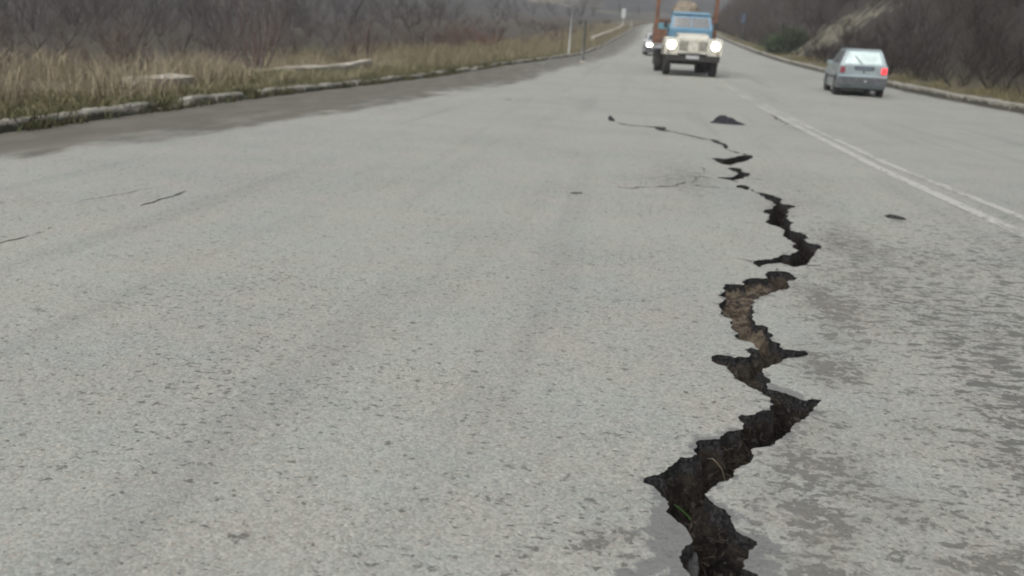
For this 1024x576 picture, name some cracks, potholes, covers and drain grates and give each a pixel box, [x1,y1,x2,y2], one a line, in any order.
crack [613,121,821,576]
crack [80,188,185,206]
